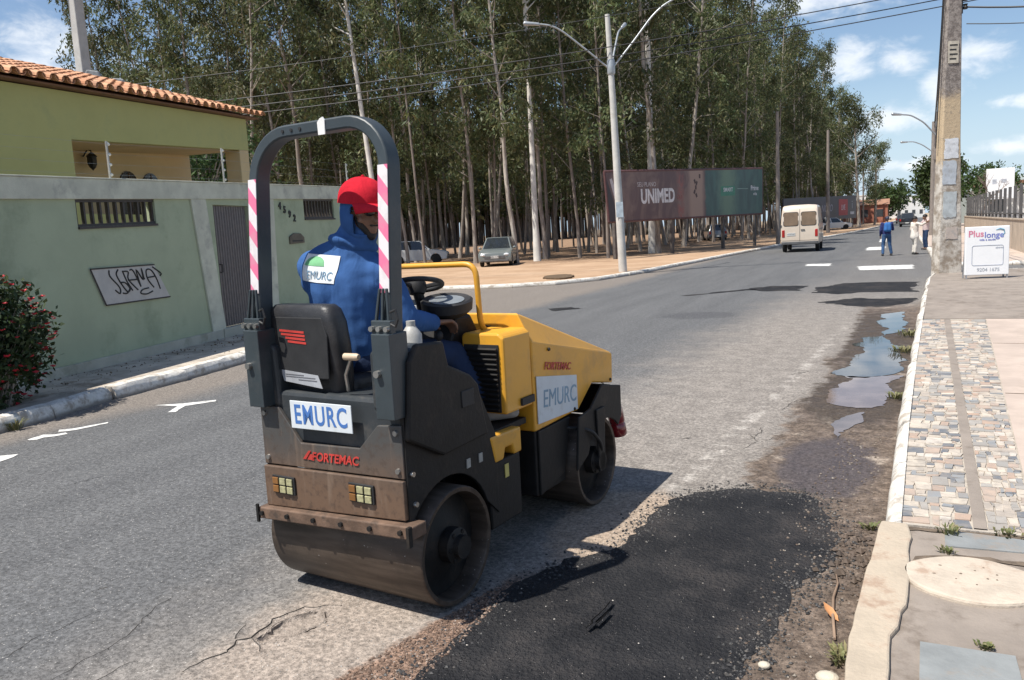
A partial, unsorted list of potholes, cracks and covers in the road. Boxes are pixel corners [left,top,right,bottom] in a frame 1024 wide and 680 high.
manhole cover [905,556,1024,609]
crack [743,400,798,449]
crack [0,586,341,680]
